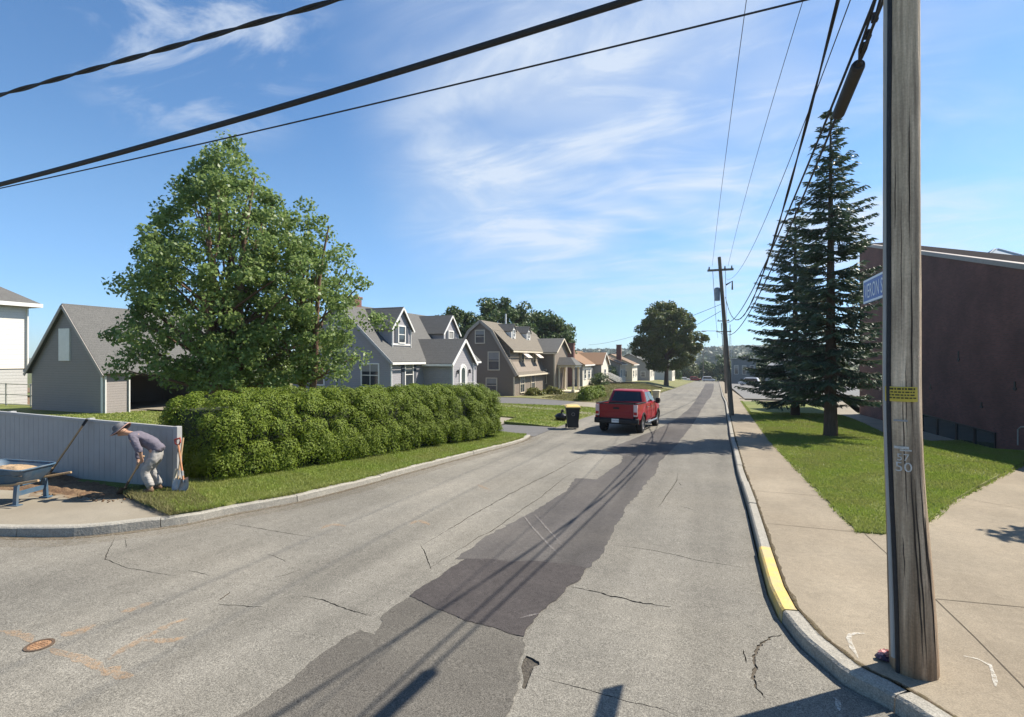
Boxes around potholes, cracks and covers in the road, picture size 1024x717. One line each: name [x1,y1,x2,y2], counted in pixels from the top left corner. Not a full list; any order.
crack [104,540,262,607]
manhole cover [23,638,55,652]
crack [573,587,671,607]
pothole [521,656,540,689]
crack [743,635,781,699]
crack [420,459,577,568]
